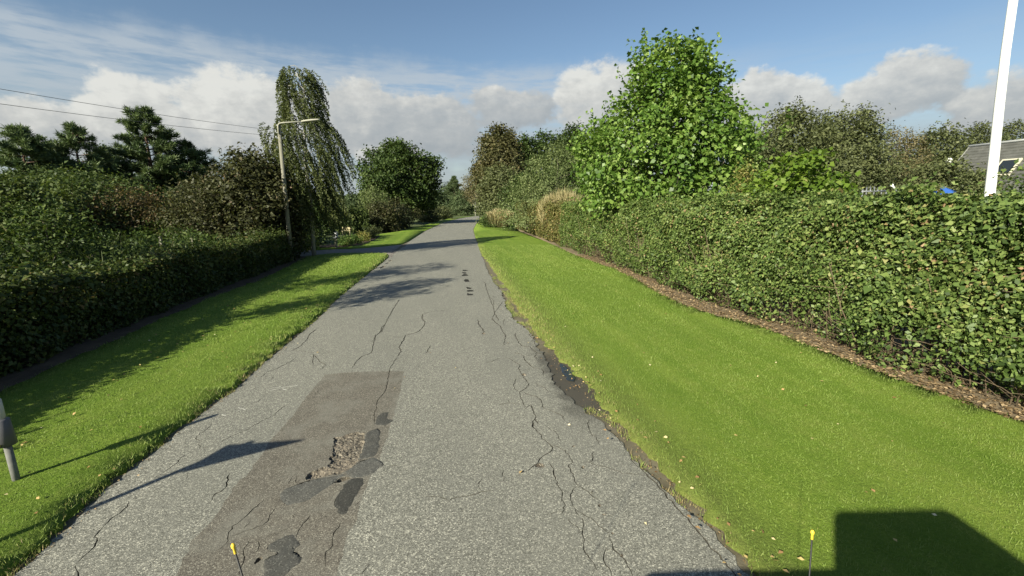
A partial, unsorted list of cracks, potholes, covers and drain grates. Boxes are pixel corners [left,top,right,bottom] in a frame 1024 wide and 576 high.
pothole [305,432,365,482]
crack [353,300,443,425]
crack [478,282,736,576]
crack [220,499,310,575]
crack [75,501,129,576]
